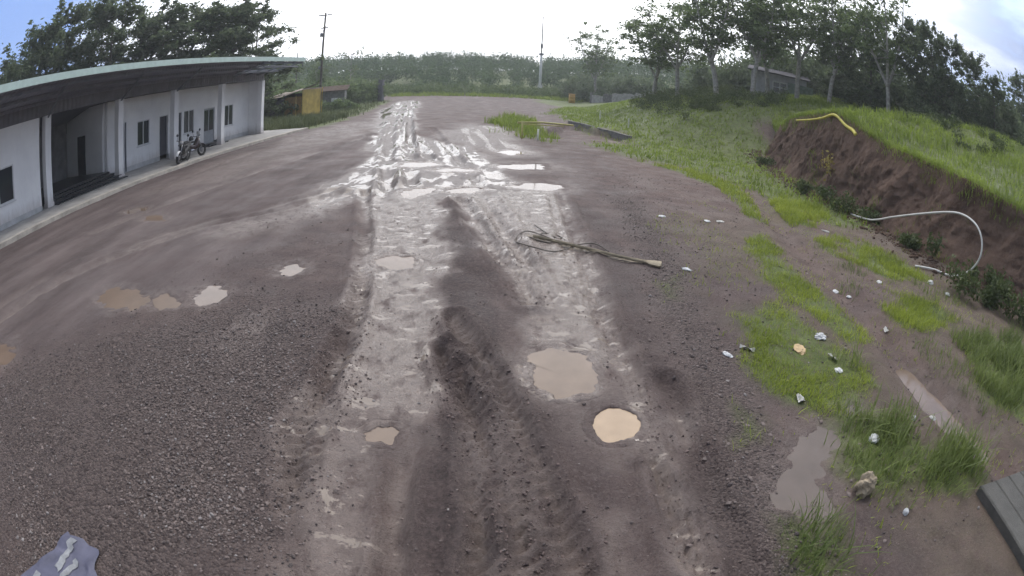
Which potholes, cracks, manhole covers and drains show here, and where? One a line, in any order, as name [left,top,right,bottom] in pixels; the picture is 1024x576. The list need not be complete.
pothole [514,342,610,404]
pothole [353,420,411,451]
pothole [582,402,651,448]
pothole [367,252,424,272]
